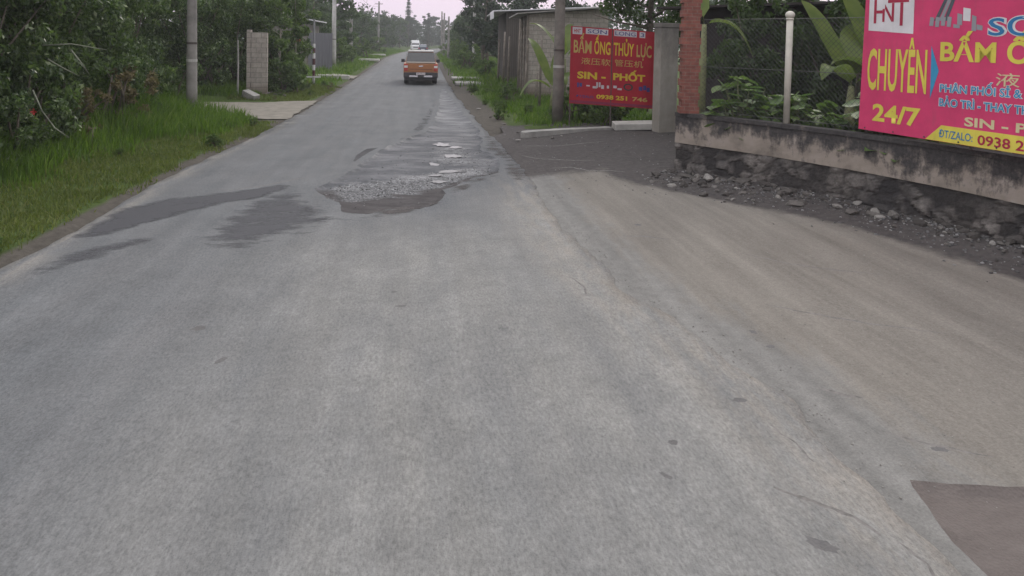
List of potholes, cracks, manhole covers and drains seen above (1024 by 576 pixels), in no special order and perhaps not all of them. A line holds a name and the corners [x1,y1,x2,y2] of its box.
crack [773,487,936,576]
pothole [314,90,500,214]
crack [771,425,814,462]
